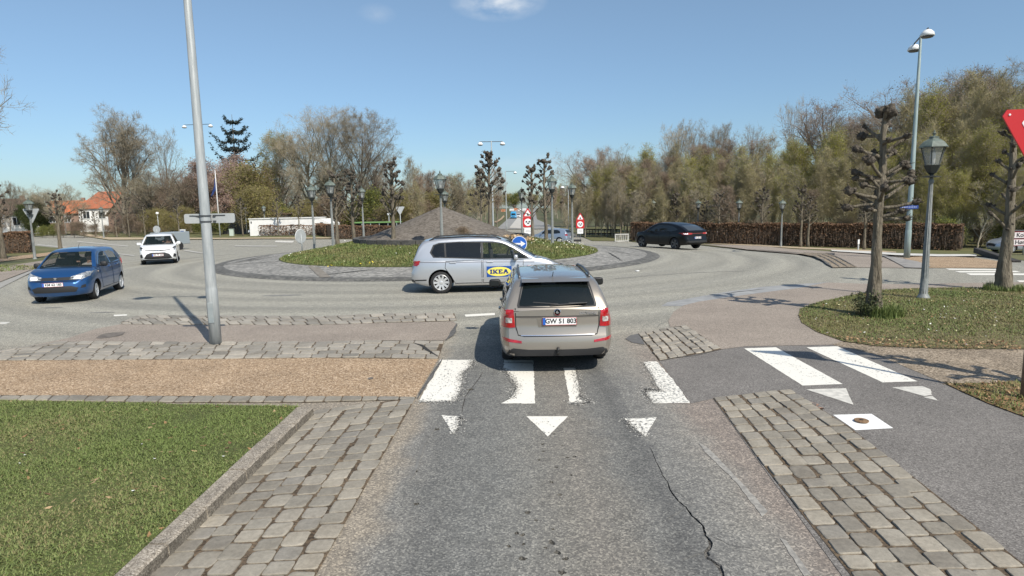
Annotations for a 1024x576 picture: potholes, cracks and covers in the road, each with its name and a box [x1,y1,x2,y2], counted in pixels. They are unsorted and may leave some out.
crack [650,448,730,576]
